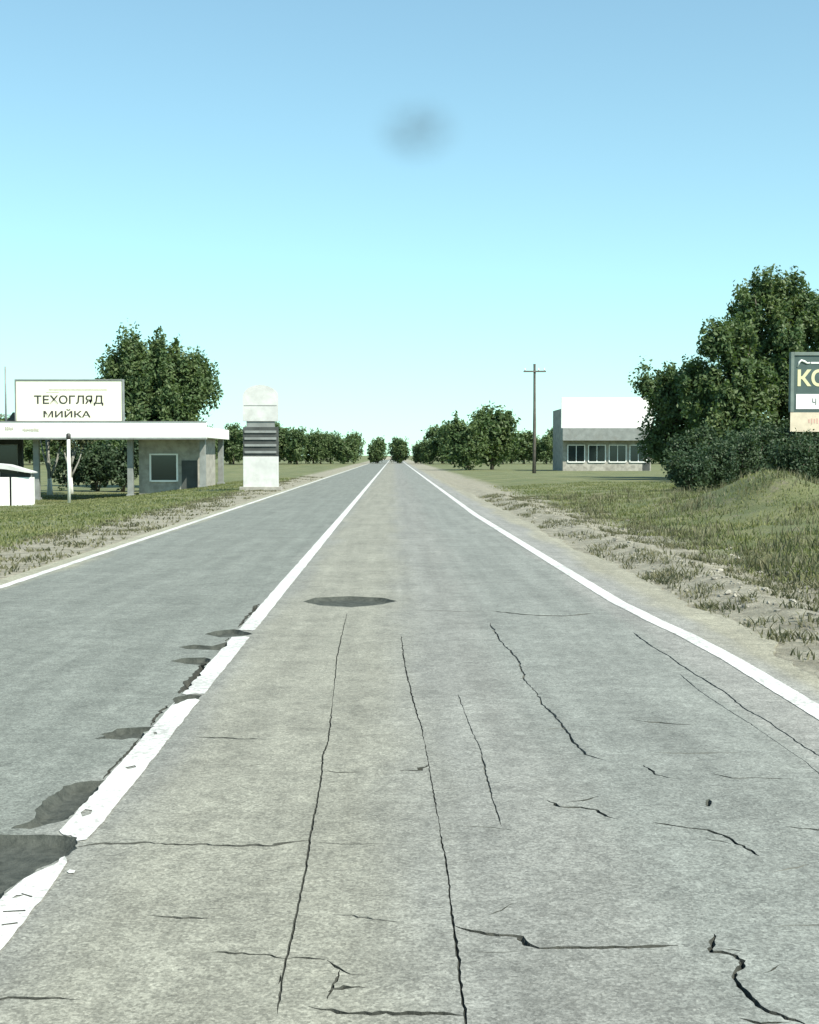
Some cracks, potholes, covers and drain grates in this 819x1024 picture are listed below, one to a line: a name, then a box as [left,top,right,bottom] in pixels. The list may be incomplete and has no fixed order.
crack [654,822,808,872]
pothole [95,727,152,740]
pothole [303,596,395,607]
pothole [0,834,78,899]
pothole [181,642,227,650]
crack [75,614,678,1024]
crack [707,924,819,1024]
crack [643,752,738,779]
pothole [206,629,251,637]
pothole [173,657,211,668]
pothole [12,780,104,829]
